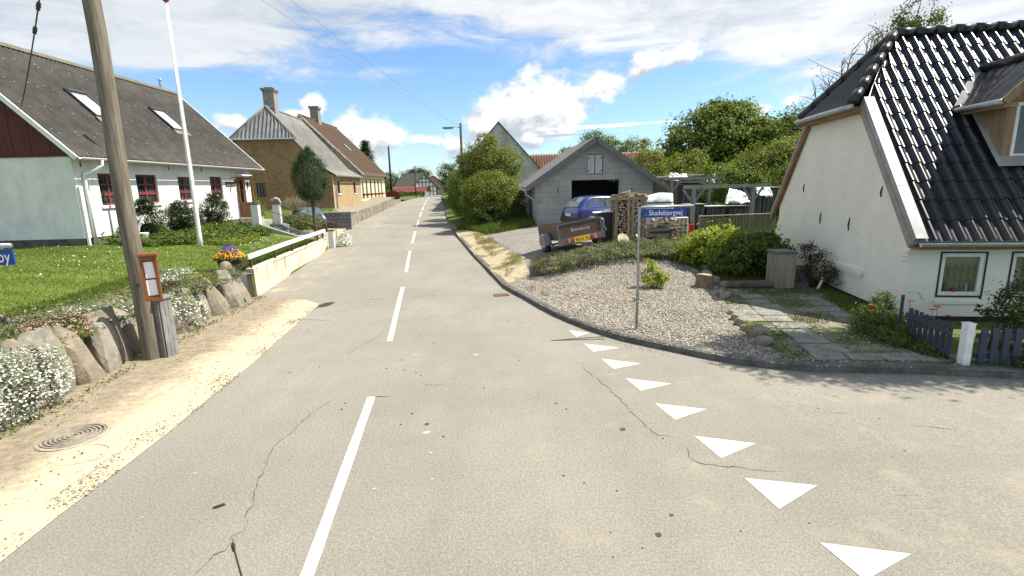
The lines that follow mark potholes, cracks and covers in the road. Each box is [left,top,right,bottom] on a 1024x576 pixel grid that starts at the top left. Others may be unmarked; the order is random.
manhole cover [34,423,111,452]
crack [191,401,330,576]
